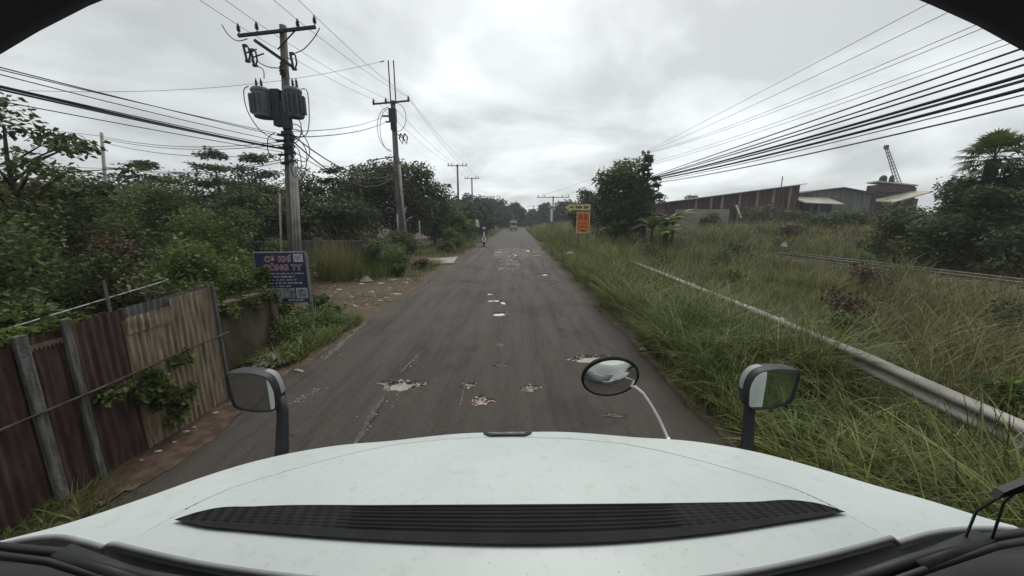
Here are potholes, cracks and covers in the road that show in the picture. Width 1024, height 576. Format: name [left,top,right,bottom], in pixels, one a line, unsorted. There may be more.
pothole [567,354,610,363]
pothole [469,394,497,406]
crack [353,394,398,444]
pothole [518,384,543,392]
crack [400,351,422,374]
pothole [383,379,419,392]
